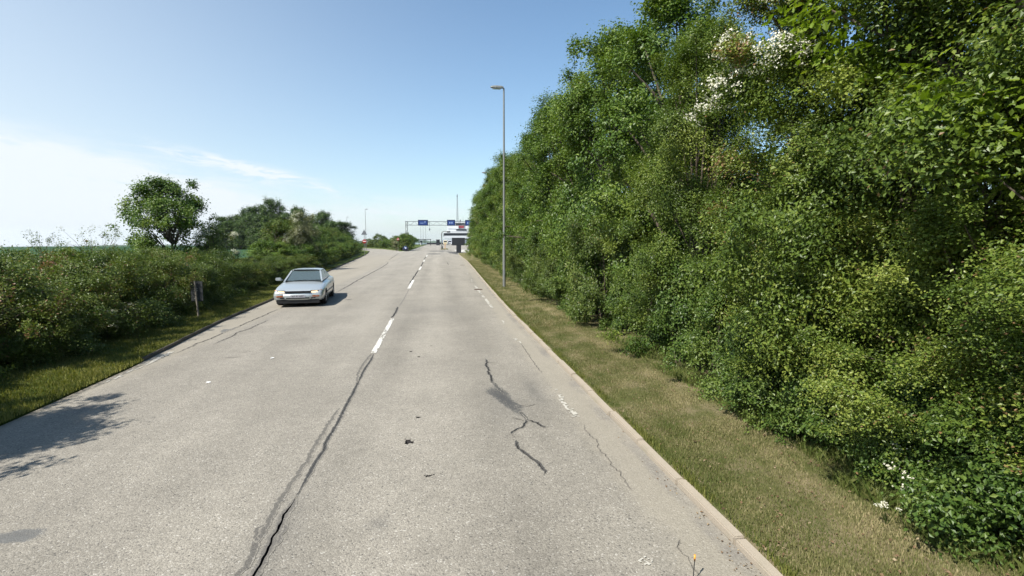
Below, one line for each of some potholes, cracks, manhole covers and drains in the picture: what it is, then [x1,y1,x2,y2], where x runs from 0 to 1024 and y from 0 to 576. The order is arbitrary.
crack [174,308,282,358]
crack [583,424,634,492]
crack [484,359,548,475]
